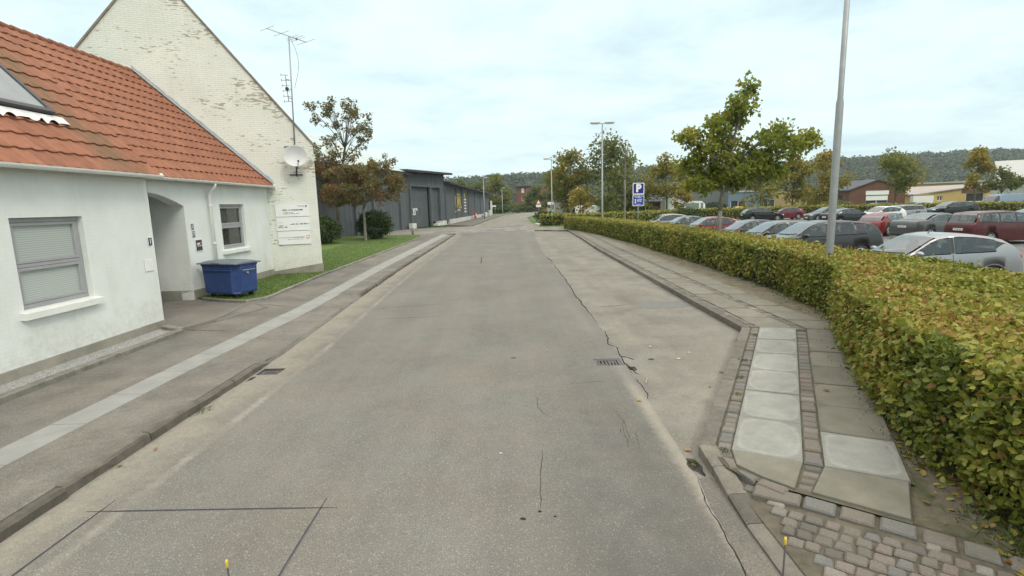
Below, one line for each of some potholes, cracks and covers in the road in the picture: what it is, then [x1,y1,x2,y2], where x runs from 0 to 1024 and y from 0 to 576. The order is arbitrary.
crack [613,409,640,448]
crack [698,479,747,576]
crack [548,258,649,400]
